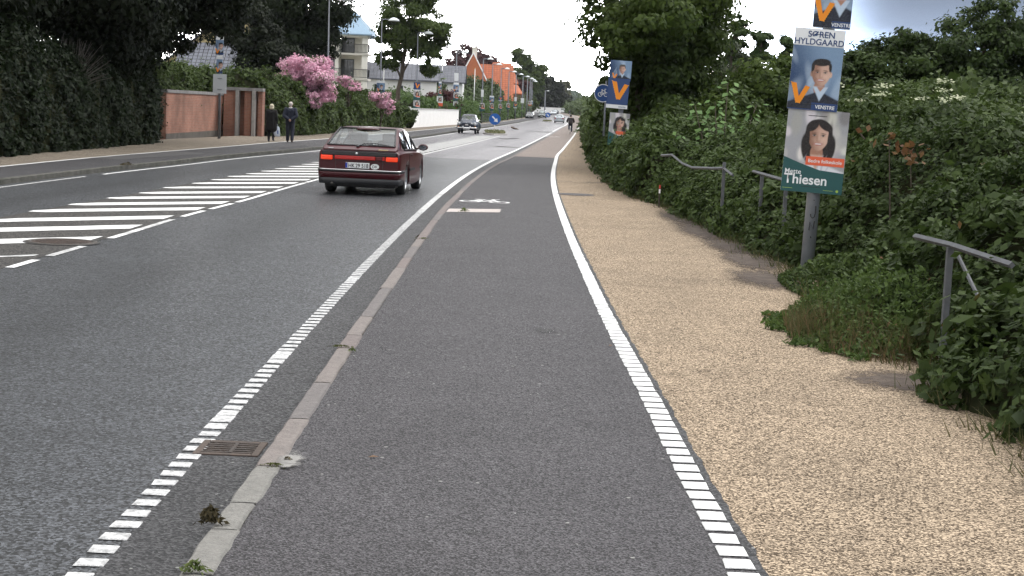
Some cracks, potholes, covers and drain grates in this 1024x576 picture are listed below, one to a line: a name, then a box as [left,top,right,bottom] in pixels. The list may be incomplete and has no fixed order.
drain grate [192,439,268,457]
